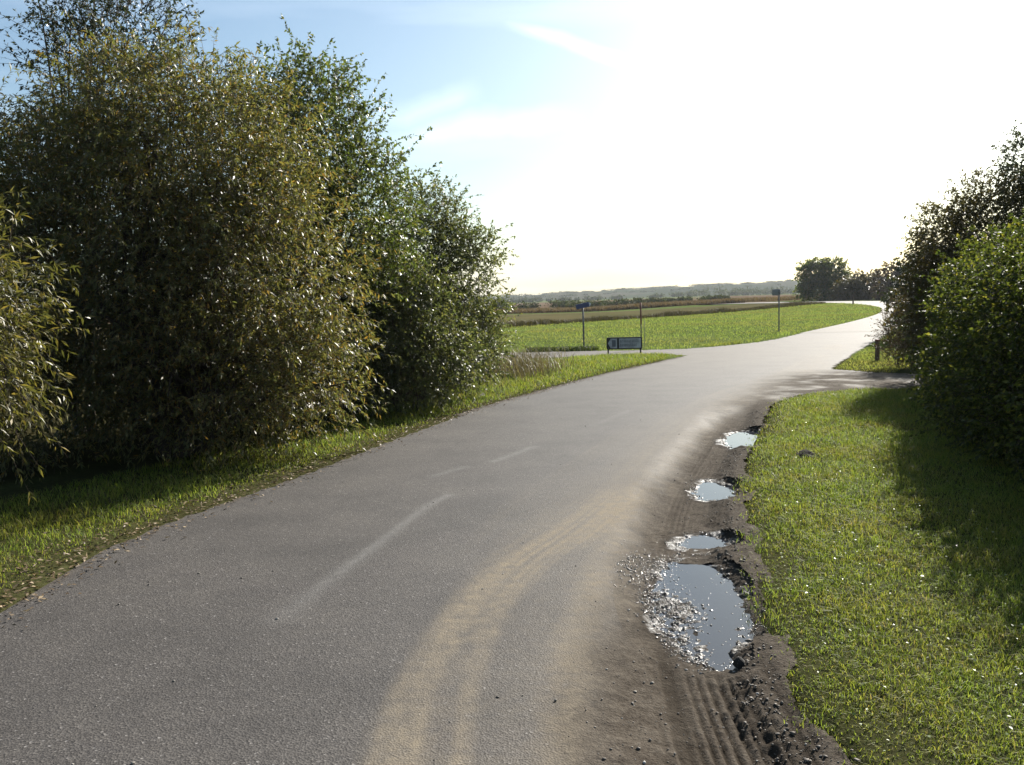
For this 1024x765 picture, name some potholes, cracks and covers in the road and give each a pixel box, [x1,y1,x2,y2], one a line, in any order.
pothole [644,521,763,565]
pothole [704,423,770,453]
pothole [599,540,797,695]
pothole [665,472,756,508]
